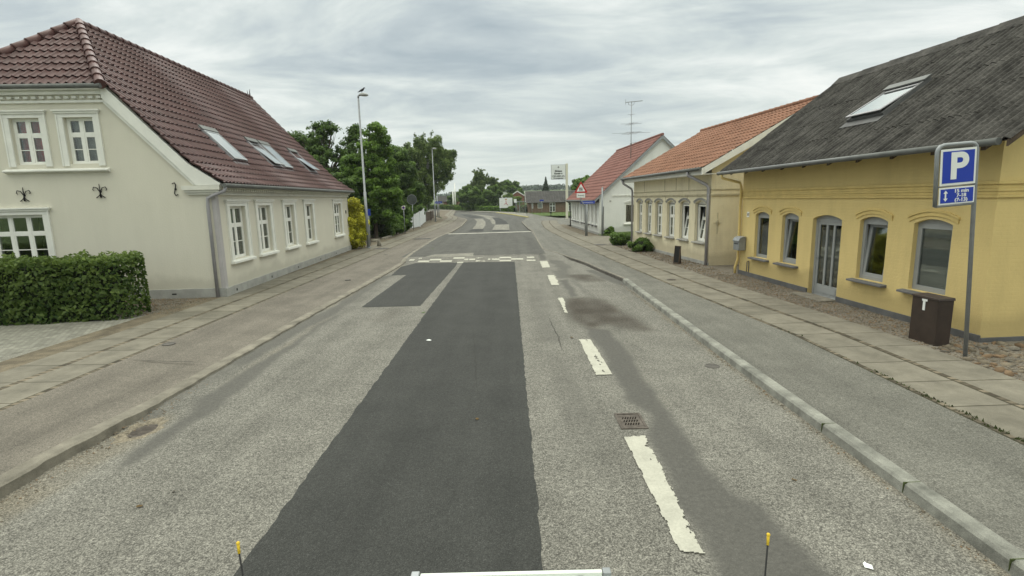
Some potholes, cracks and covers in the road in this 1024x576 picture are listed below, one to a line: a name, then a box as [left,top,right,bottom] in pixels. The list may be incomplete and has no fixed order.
drain grate [614,413,649,429]
